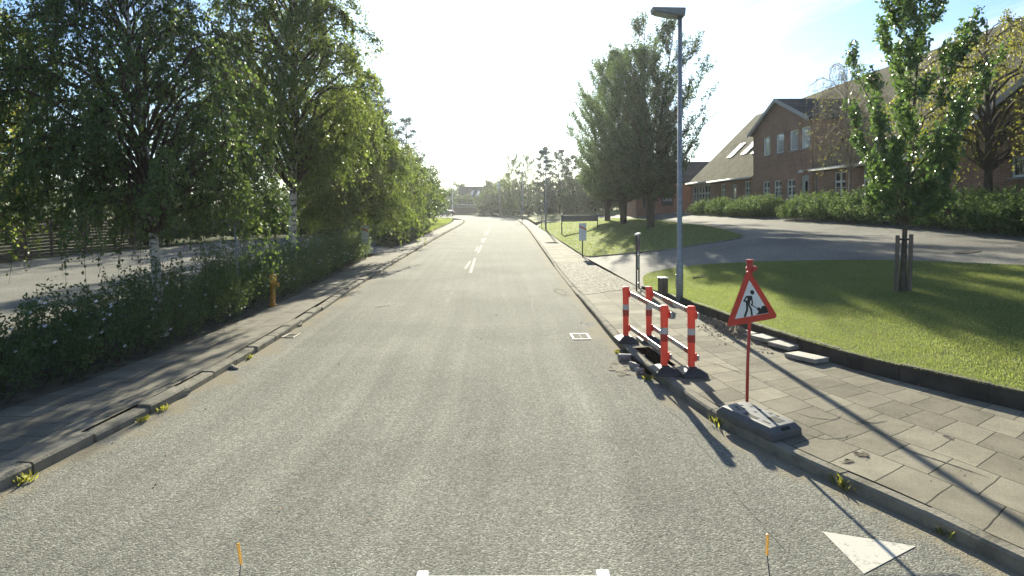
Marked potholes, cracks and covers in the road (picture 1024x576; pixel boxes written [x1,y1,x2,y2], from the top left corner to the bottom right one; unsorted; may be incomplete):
pothole [623,348,672,375]
